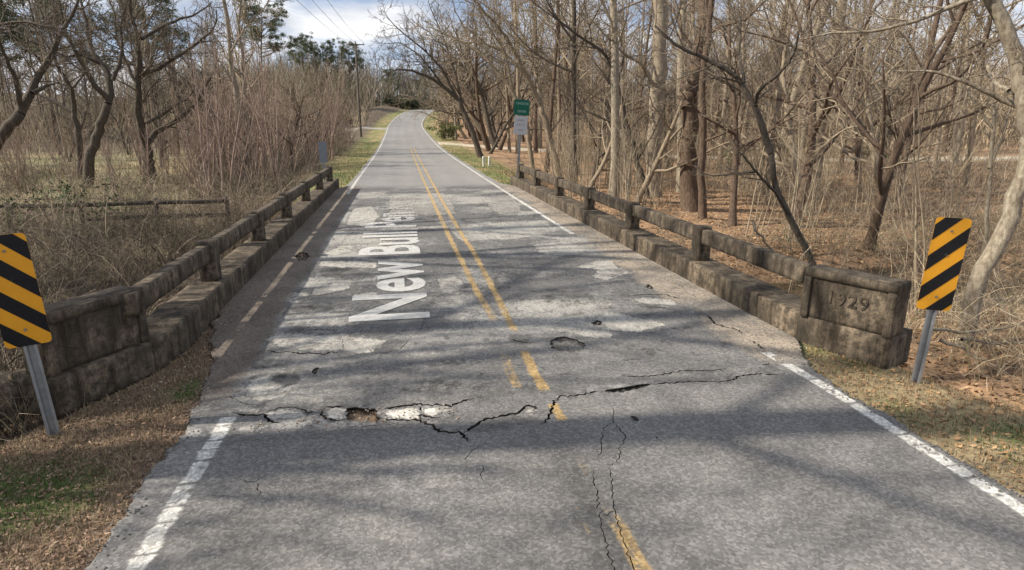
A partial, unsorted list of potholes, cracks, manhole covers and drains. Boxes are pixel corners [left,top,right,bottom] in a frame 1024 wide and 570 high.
crack [622,369,722,377]
crack [592,408,635,570]
pothole [550,336,586,352]
pothole [345,407,381,422]
crack [707,315,772,365]
crack [257,329,344,368]
